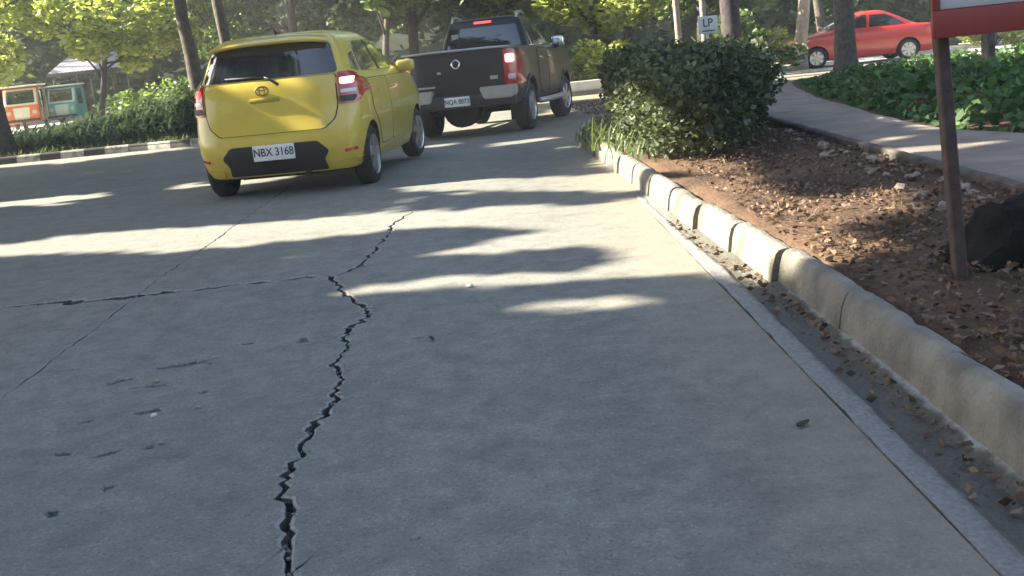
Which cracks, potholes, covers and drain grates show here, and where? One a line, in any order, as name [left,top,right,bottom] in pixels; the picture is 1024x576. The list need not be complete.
crack [0,185,416,576]
